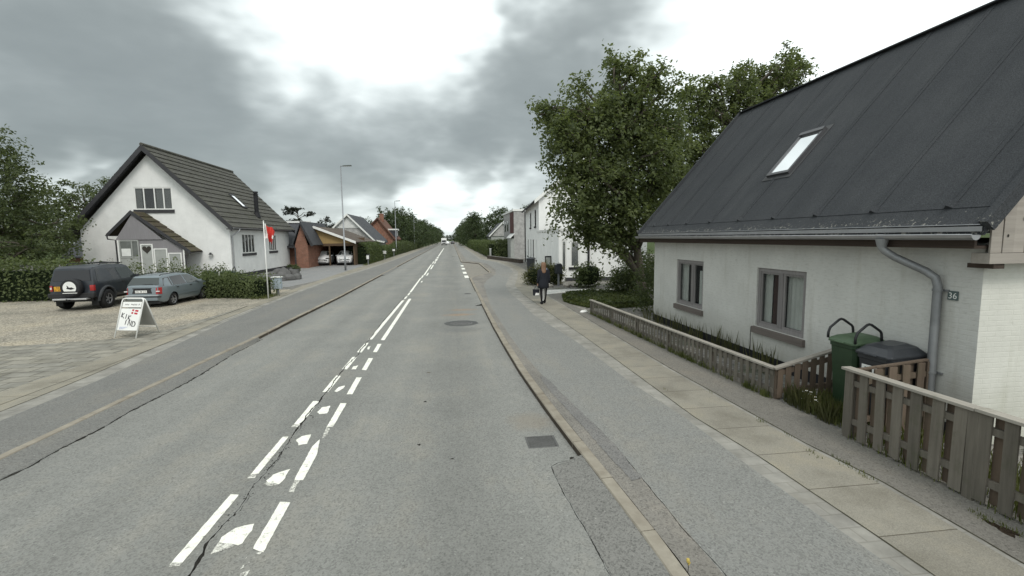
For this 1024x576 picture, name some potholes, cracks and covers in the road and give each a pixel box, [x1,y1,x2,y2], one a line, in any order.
drain grate [525,435,559,449]
